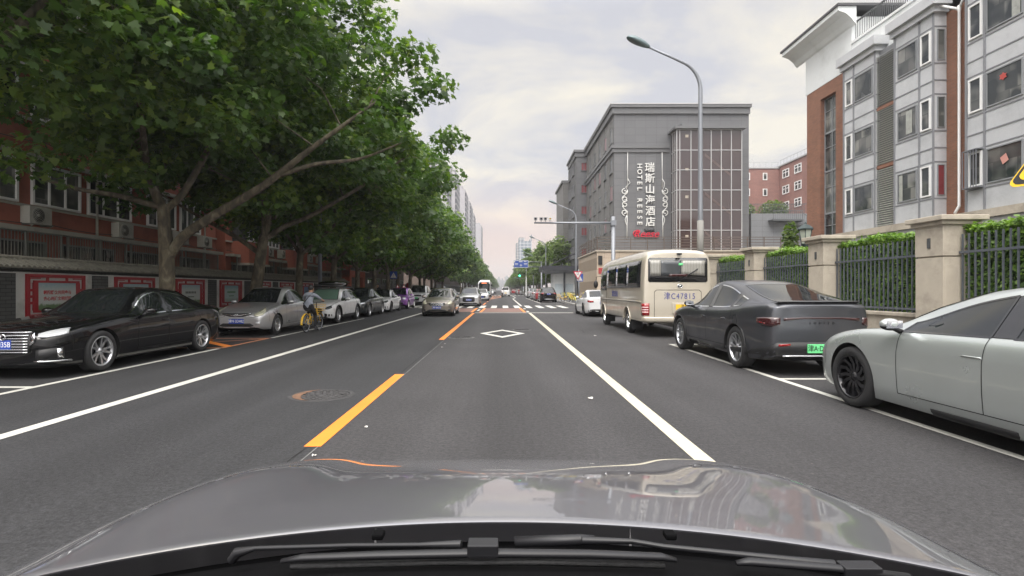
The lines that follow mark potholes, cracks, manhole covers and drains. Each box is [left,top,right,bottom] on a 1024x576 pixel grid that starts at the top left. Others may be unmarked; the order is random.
manhole cover [287,389,357,402]
